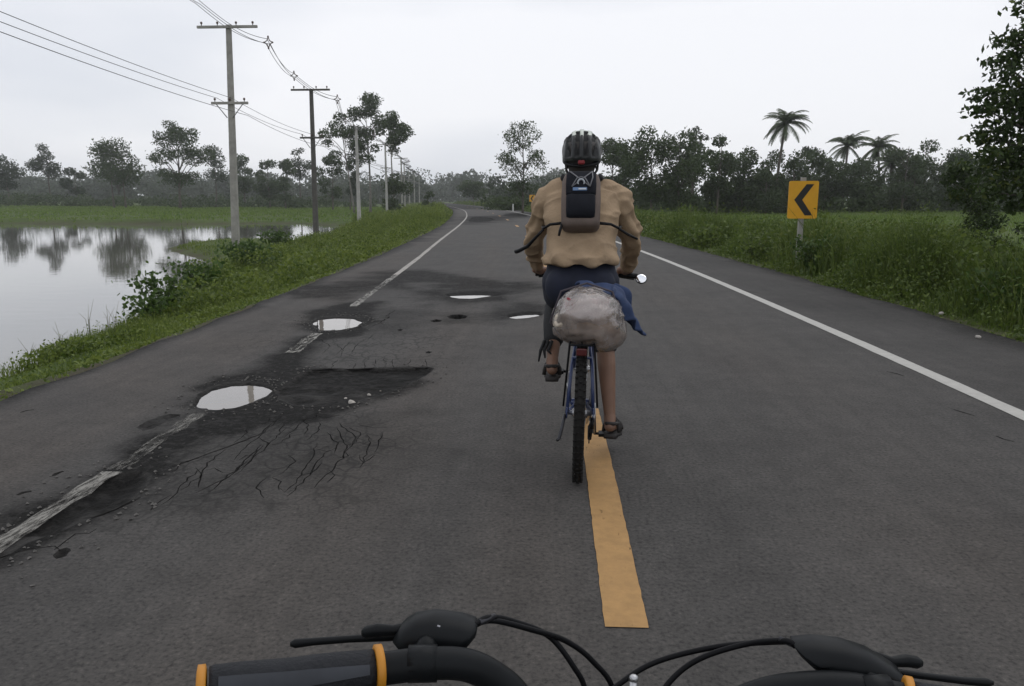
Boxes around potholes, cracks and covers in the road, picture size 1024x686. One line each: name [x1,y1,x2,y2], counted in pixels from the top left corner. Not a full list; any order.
pothole [505,310,544,319]
crack [0,413,387,558]
pothole [192,381,276,410]
pothole [441,288,528,299]
crack [314,310,430,371]
pothole [311,316,365,331]
